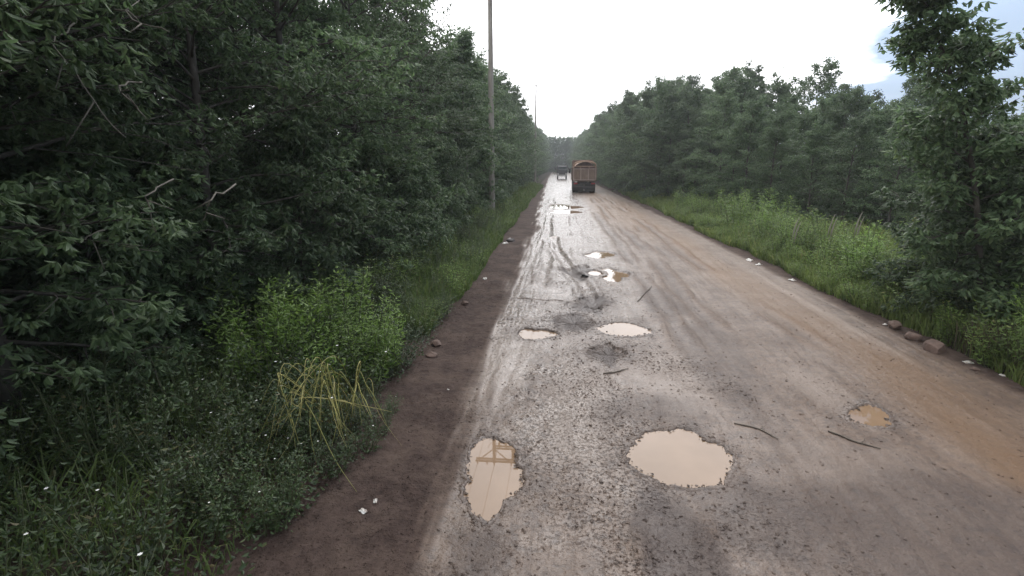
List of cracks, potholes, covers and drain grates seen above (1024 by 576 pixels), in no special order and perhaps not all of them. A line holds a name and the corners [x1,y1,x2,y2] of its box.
pothole [590,321,658,338]
pothole [622,425,741,492]
pothole [581,266,636,283]
pothole [842,402,897,429]
pothole [582,340,632,366]
pothole [577,250,620,260]
pothole [458,433,529,526]
pothole [513,327,564,341]
